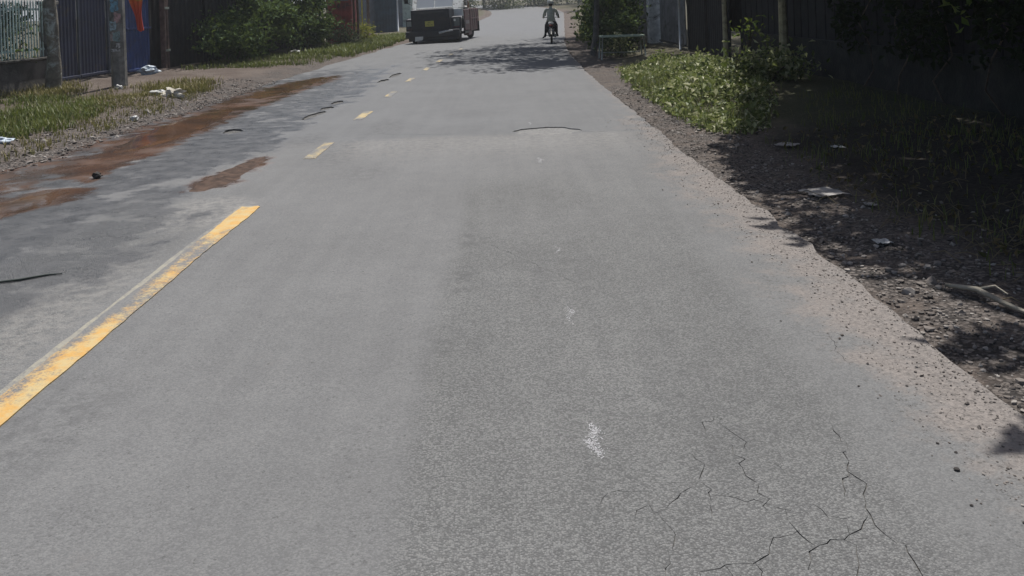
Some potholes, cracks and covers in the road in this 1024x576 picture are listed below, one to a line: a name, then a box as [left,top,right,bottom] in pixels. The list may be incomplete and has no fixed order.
crack [565,417,923,576]
